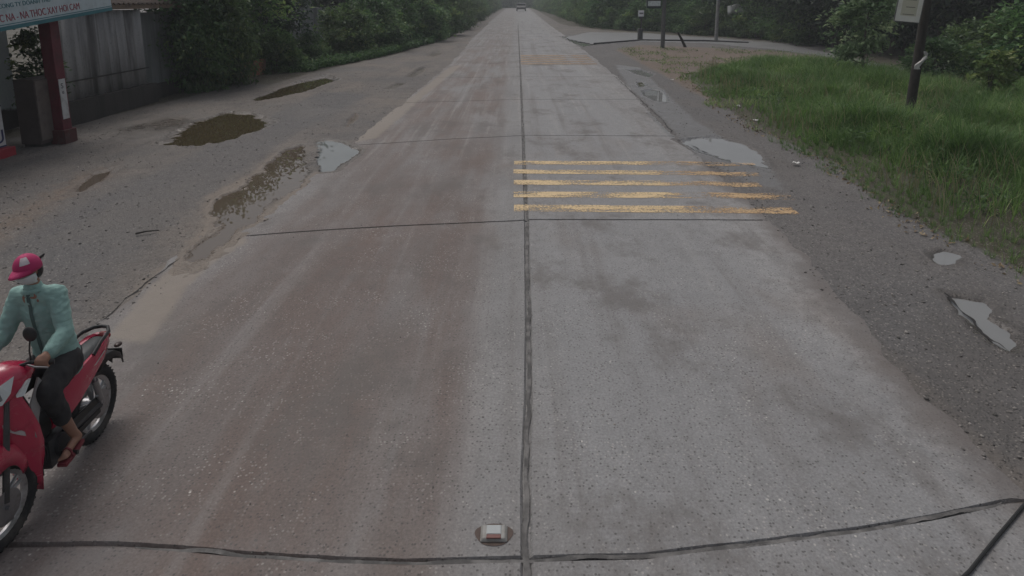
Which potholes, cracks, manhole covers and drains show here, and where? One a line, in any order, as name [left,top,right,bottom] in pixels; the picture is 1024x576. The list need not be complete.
pothole [168,142,321,278]
pothole [240,74,342,102]
pothole [57,165,123,196]
pothole [917,245,978,269]
pothole [148,110,280,149]
pothole [302,138,366,174]
pothole [670,135,780,170]
crack [103,251,190,320]
pothole [928,287,1024,358]
pothole [640,88,672,103]
